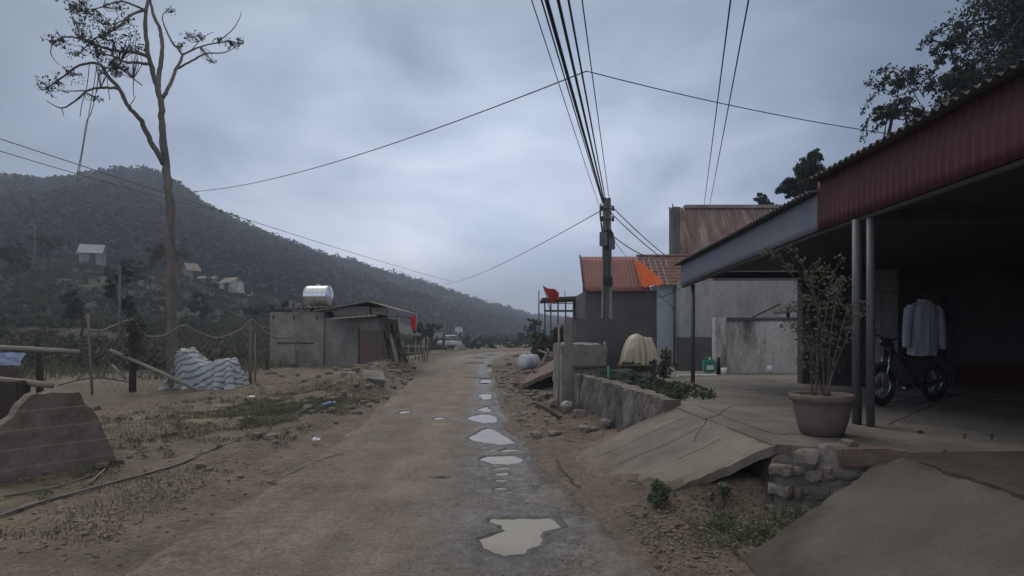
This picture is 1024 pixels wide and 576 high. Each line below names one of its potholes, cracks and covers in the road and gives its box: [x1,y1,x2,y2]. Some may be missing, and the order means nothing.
pothole [472,454,536,466]
pothole [462,426,527,446]
crack [556,459,581,487]
pothole [468,514,569,560]
pothole [474,393,498,401]
pothole [463,413,501,423]
